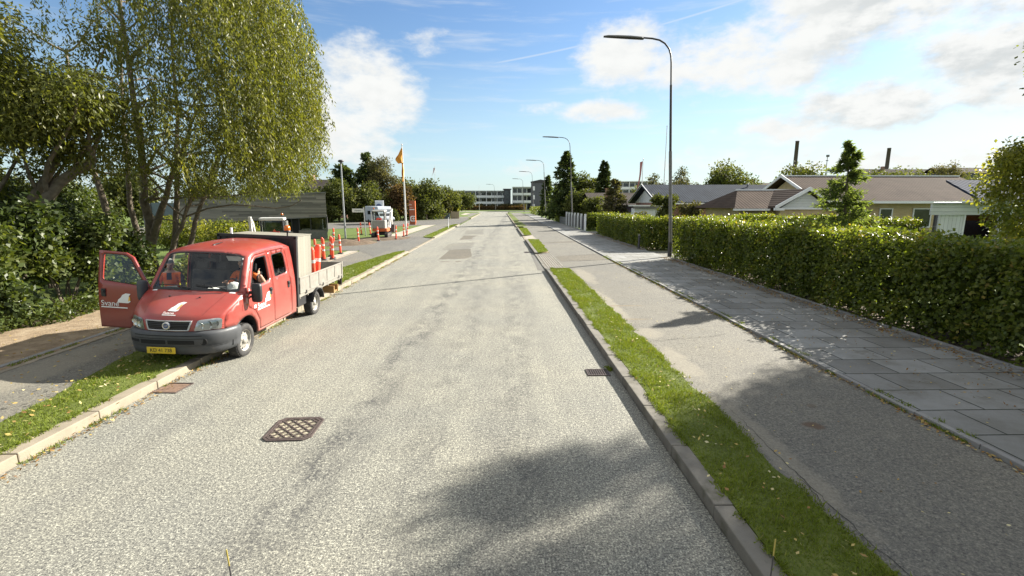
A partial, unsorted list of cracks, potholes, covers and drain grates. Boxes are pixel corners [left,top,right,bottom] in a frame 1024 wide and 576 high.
manhole cover [150,382,194,393]
